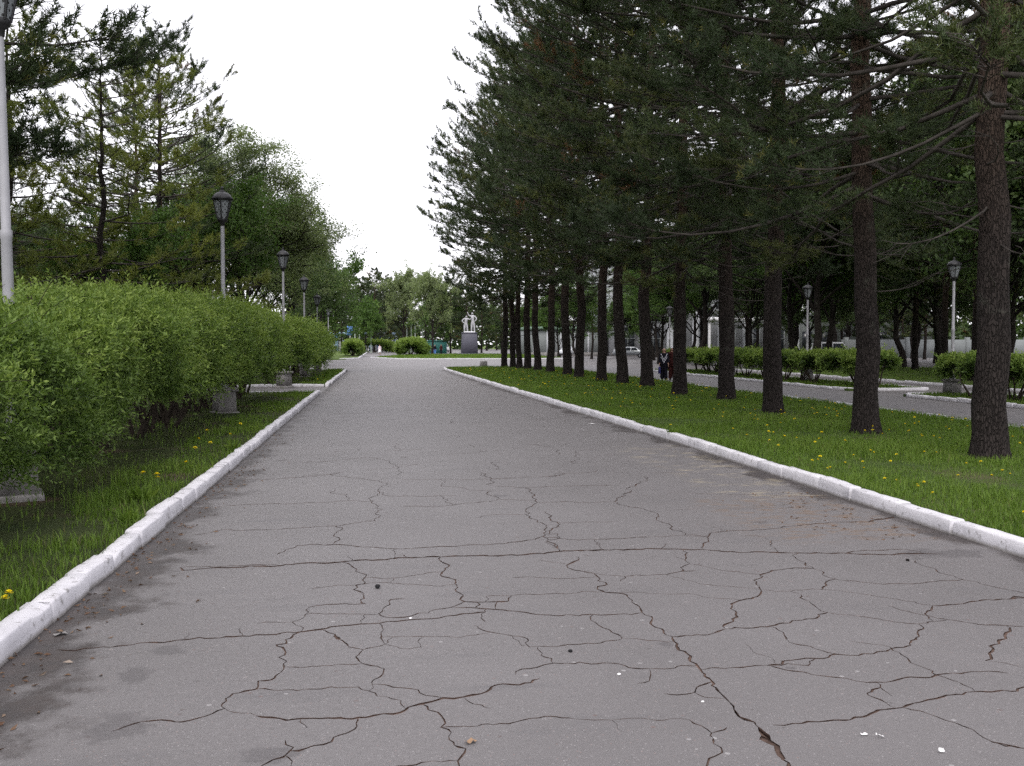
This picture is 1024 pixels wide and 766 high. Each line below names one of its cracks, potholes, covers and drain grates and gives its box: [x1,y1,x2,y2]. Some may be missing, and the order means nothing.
crack [61,471,1024,766]
